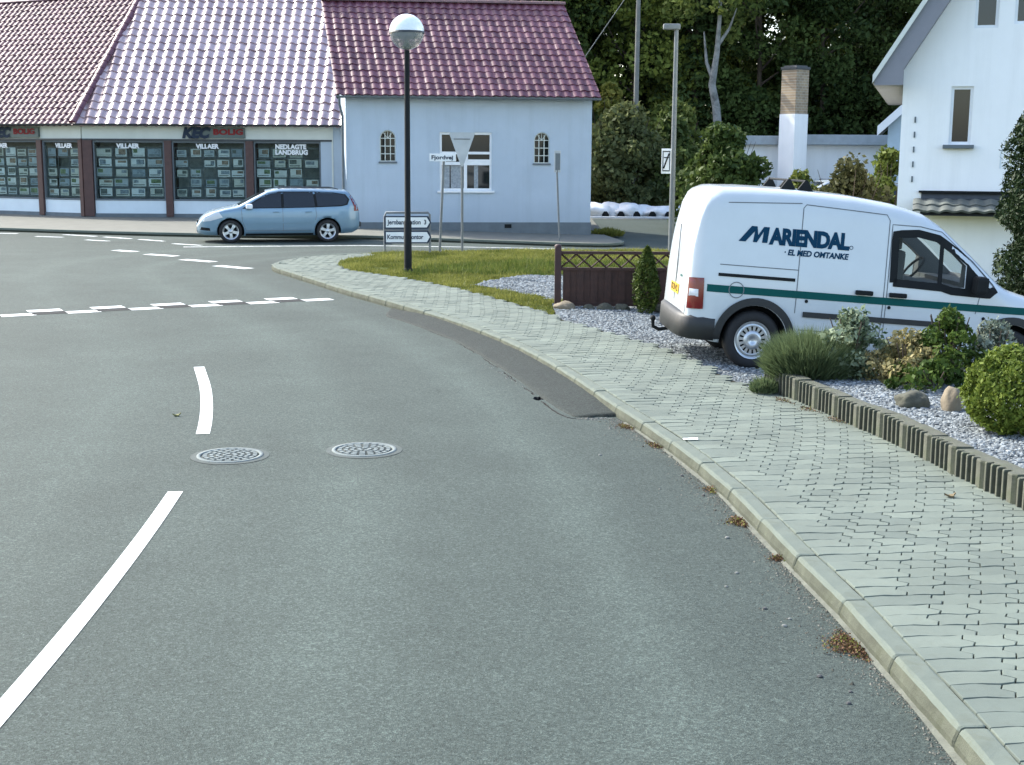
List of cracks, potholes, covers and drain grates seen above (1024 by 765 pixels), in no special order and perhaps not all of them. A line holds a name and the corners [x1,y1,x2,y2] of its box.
manhole cover [326,442,402,458]
manhole cover [190,447,269,464]
